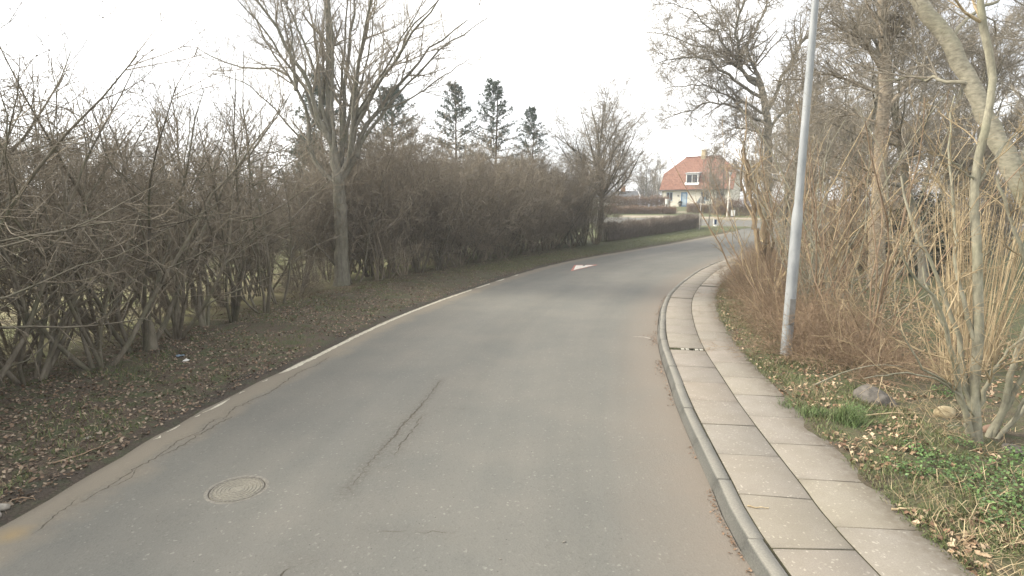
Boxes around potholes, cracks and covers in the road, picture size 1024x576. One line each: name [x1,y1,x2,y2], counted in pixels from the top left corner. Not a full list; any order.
crack [34,357,329,533]
crack [353,383,438,485]
manhole cover [204,475,269,504]
